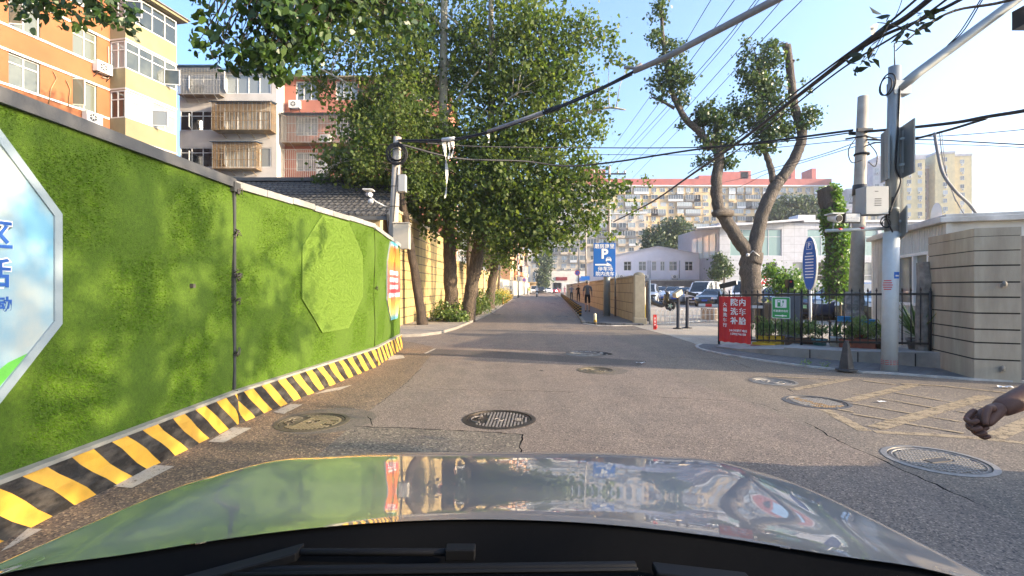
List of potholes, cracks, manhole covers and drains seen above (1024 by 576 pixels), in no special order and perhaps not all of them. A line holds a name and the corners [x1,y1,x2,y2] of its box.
manhole cover [782,395,853,409]
manhole cover [880,445,1002,478]
manhole cover [749,377,799,386]
manhole cover [273,413,350,432]
crack [357,416,524,452]
manhole cover [462,410,536,430]
